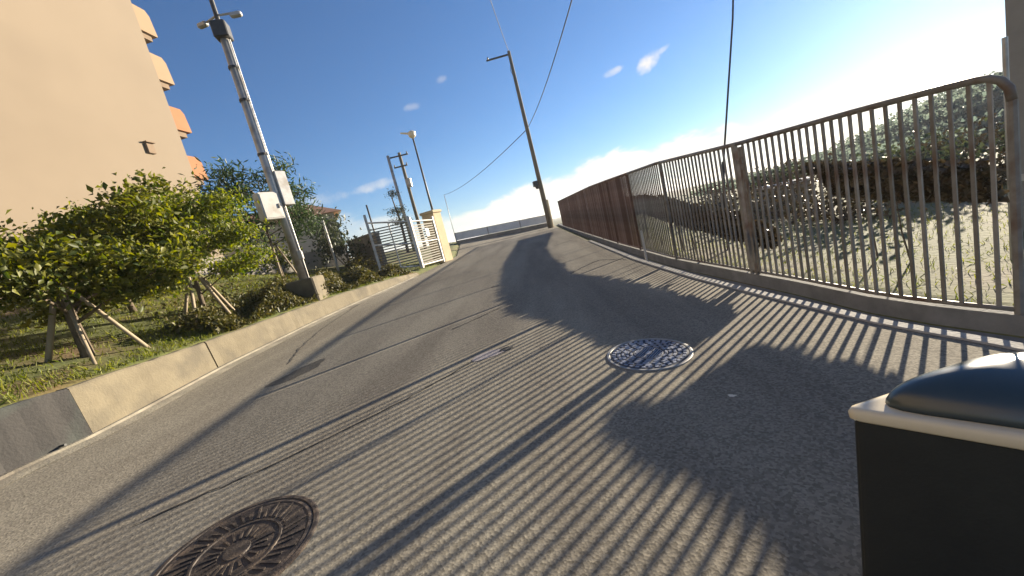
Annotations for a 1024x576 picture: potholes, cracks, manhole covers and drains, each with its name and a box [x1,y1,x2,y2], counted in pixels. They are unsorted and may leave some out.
manhole cover [153,495,319,576]
manhole cover [607,338,694,371]
